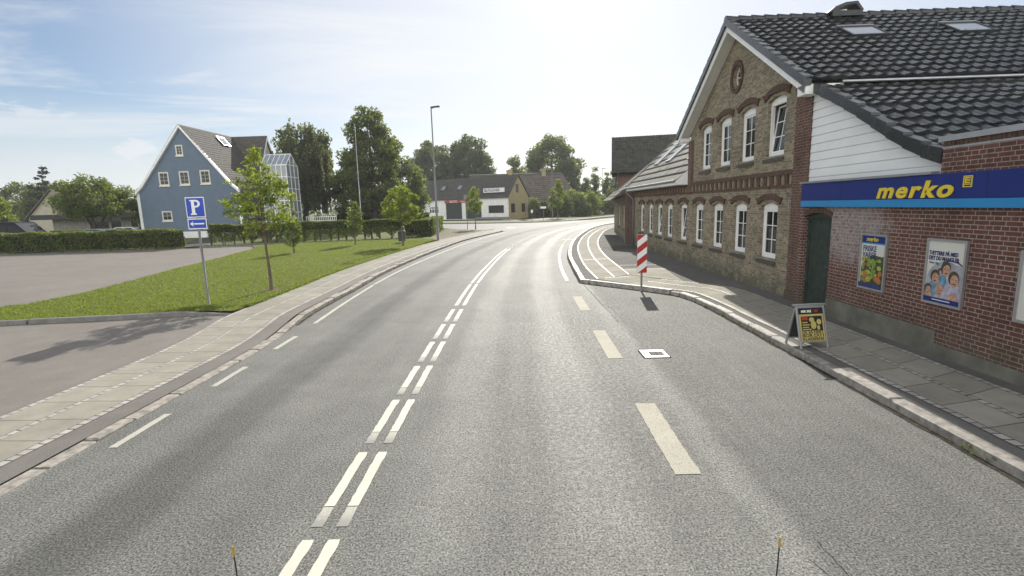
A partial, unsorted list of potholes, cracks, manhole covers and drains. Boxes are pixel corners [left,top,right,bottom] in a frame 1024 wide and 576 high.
manhole cover [637,350,671,359]
